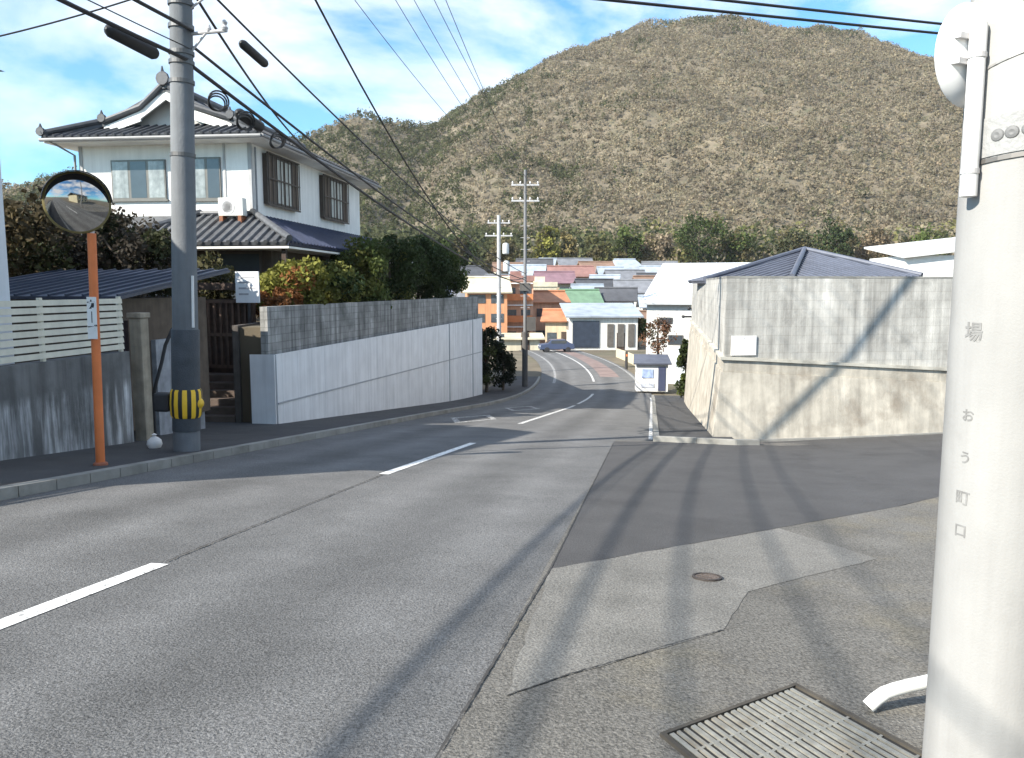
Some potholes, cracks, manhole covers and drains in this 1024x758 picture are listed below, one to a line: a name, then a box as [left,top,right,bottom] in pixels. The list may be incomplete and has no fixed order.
manhole cover [692,572,722,582]
drain grate [660,682,922,758]
